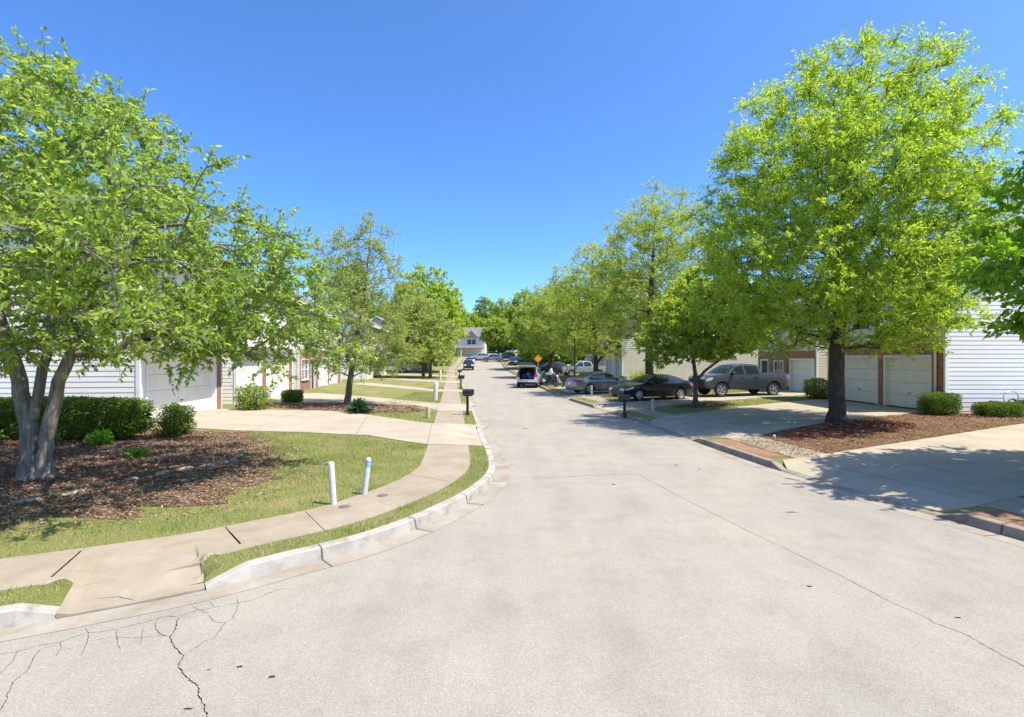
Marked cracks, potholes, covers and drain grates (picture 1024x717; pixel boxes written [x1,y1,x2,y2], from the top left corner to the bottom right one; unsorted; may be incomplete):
crack [0,589,281,717]
